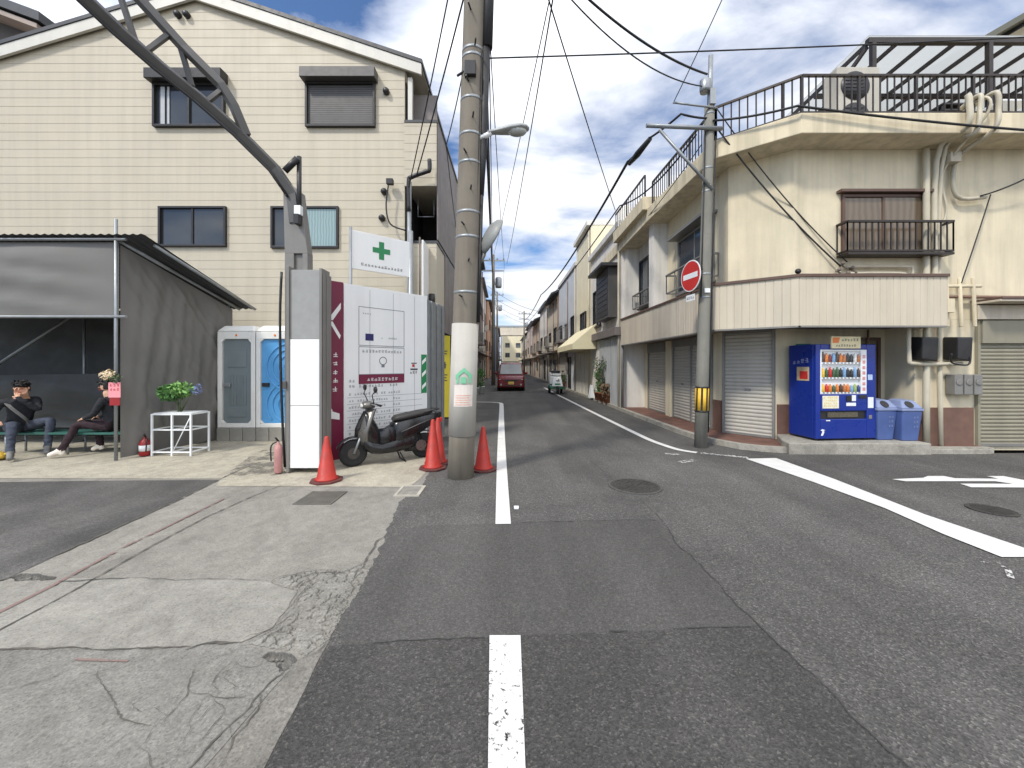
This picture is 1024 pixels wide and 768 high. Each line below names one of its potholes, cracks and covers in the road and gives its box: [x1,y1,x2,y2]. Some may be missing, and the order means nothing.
pothole [9,573,55,582]
pothole [262,651,297,671]
utility cover [393,485,426,497]
crack [0,536,384,768]
manhole cover [964,503,1021,517]
manhole cover [609,478,662,495]
